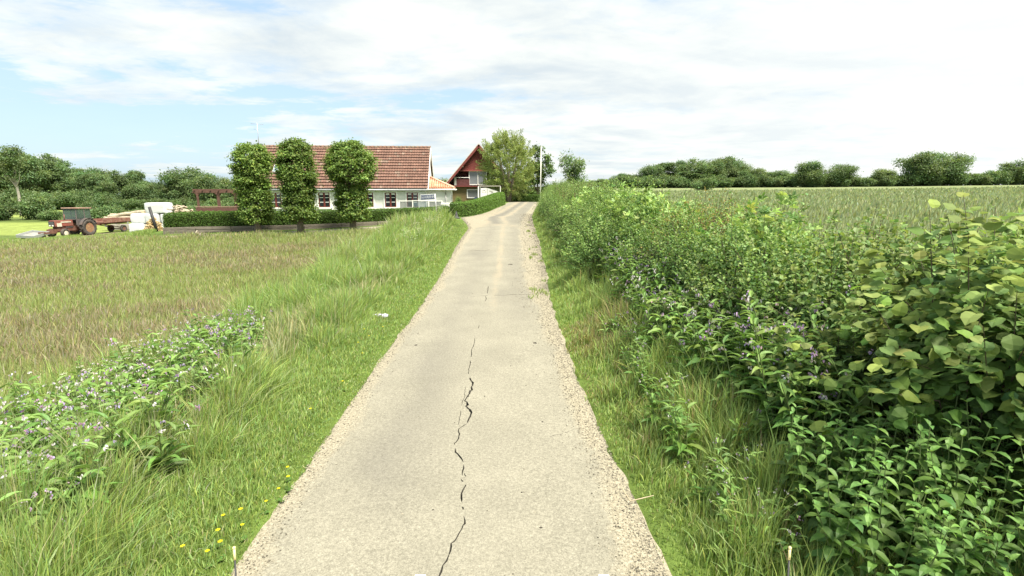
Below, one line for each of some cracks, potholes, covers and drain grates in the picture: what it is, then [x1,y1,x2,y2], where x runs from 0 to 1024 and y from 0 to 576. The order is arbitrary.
crack [439,326,479,576]
